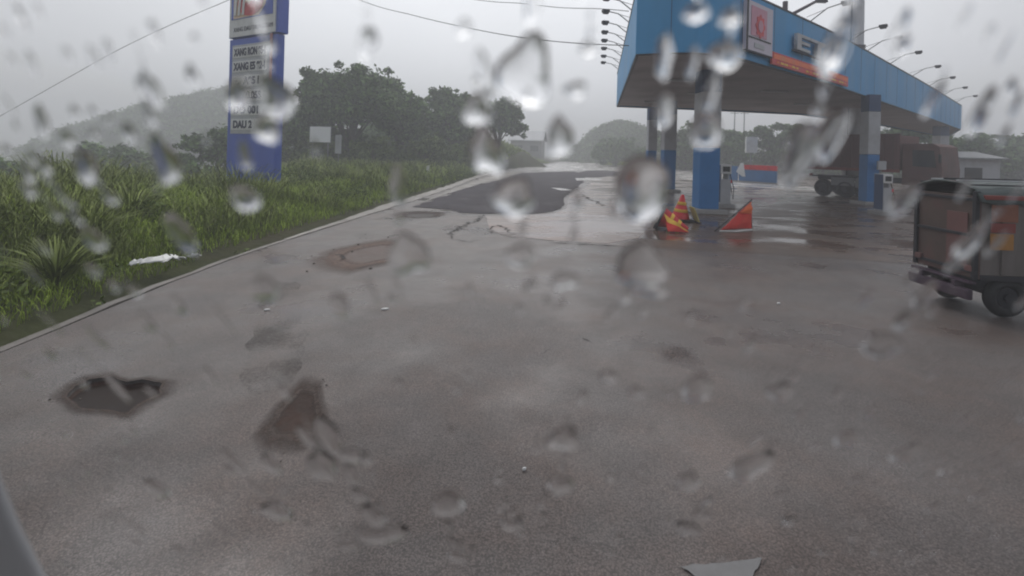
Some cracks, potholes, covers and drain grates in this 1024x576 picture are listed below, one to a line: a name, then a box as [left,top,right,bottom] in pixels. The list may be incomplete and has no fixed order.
pothole [37,375,168,416]
crack [447,215,513,242]
pothole [258,379,328,462]
